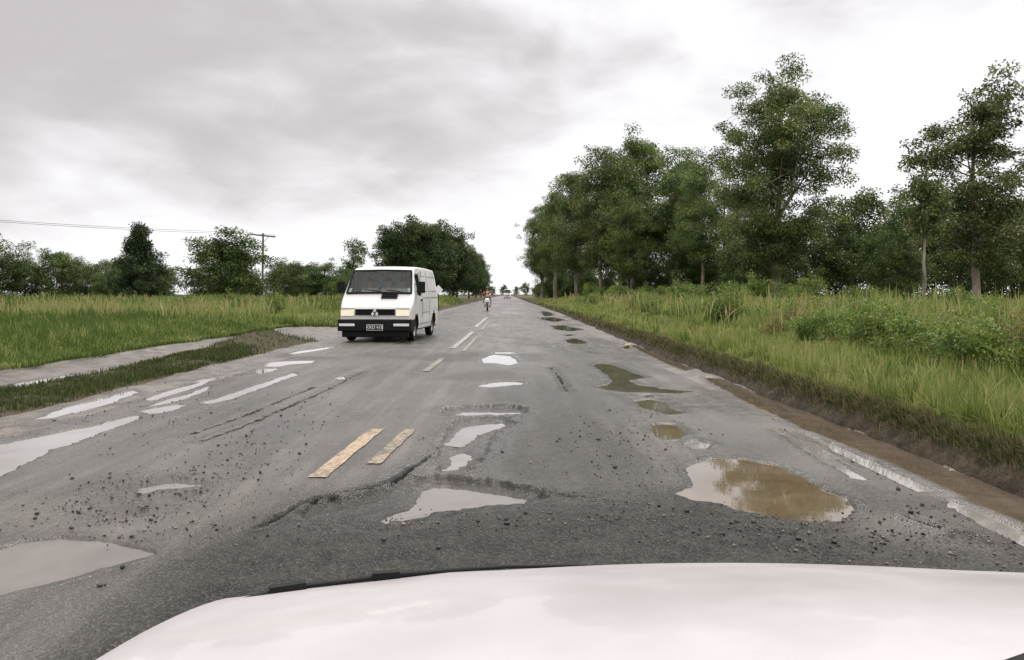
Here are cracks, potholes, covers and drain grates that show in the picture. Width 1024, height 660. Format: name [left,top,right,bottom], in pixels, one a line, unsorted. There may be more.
pothole [662,455,871,526]
pothole [0,532,169,600]
pothole [586,362,699,394]
pothole [642,422,693,441]
pothole [469,380,531,388]
pothole [628,397,691,416]
pothole [287,470,566,530]
pothole [424,403,538,417]
crack [474,315,636,393]
crack [178,371,439,533]
pothole [544,324,589,332]
pothole [422,415,527,473]
